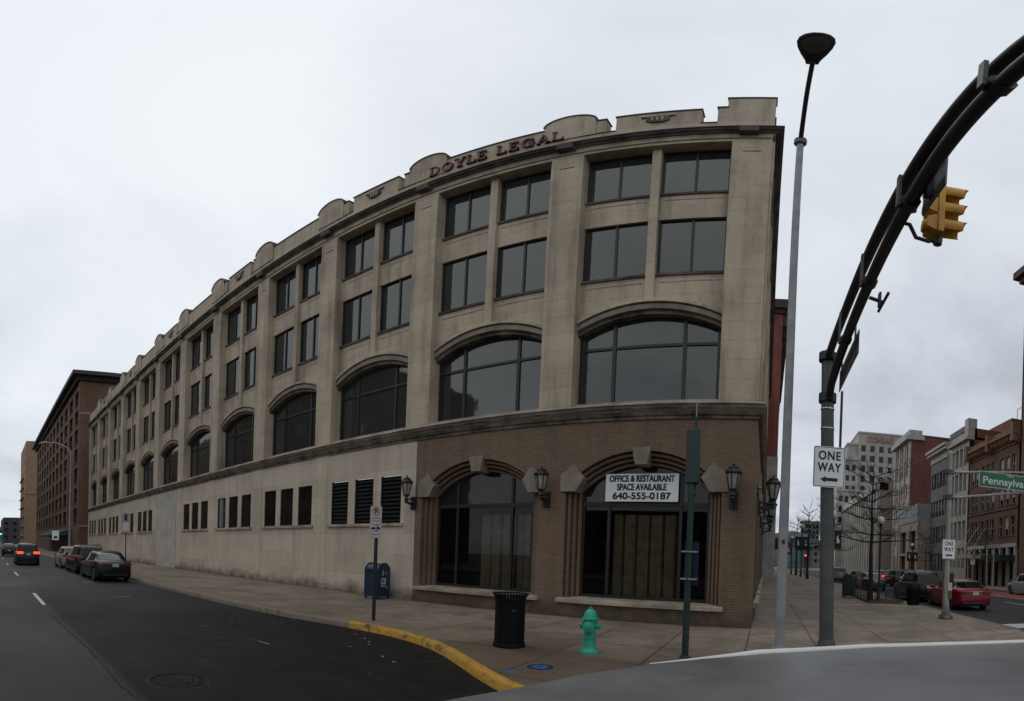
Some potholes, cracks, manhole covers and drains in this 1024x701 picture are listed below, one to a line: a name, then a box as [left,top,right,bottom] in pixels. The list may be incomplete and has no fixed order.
manhole cover [146,673,210,690]
